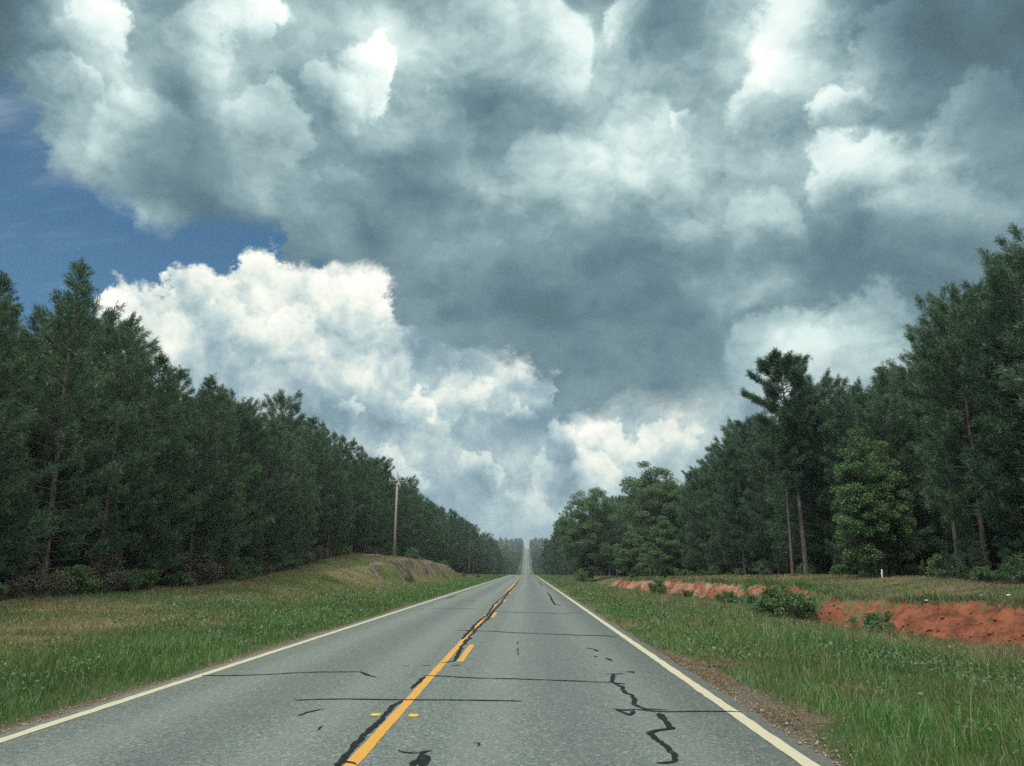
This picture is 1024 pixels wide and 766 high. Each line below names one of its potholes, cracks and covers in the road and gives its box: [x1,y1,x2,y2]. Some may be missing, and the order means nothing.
crack [297,577,624,730]
